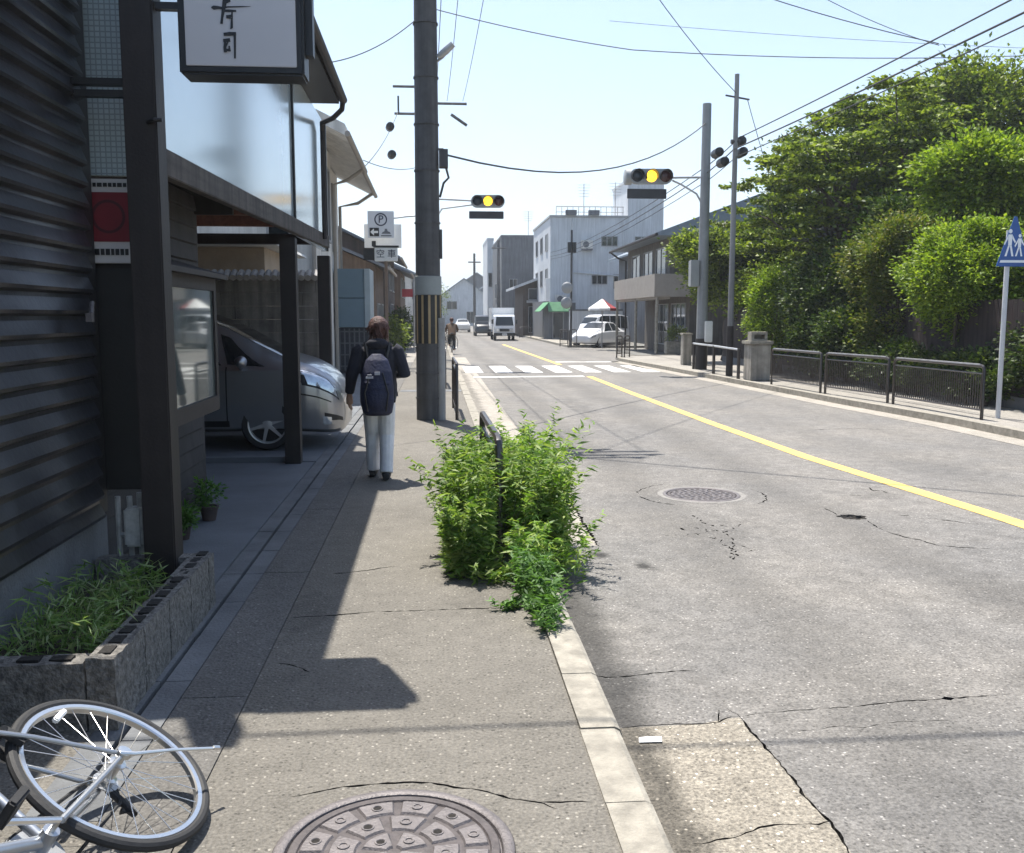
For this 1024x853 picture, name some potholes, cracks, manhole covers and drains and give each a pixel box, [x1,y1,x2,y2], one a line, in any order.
crack [826,509,989,549]
crack [600,670,687,678]
crack [294,608,497,618]
manhole cover [657,487,746,503]
crack [665,515,752,560]
crack [292,781,585,809]
manhole cover [272,789,515,853]
crack [626,694,1006,853]
